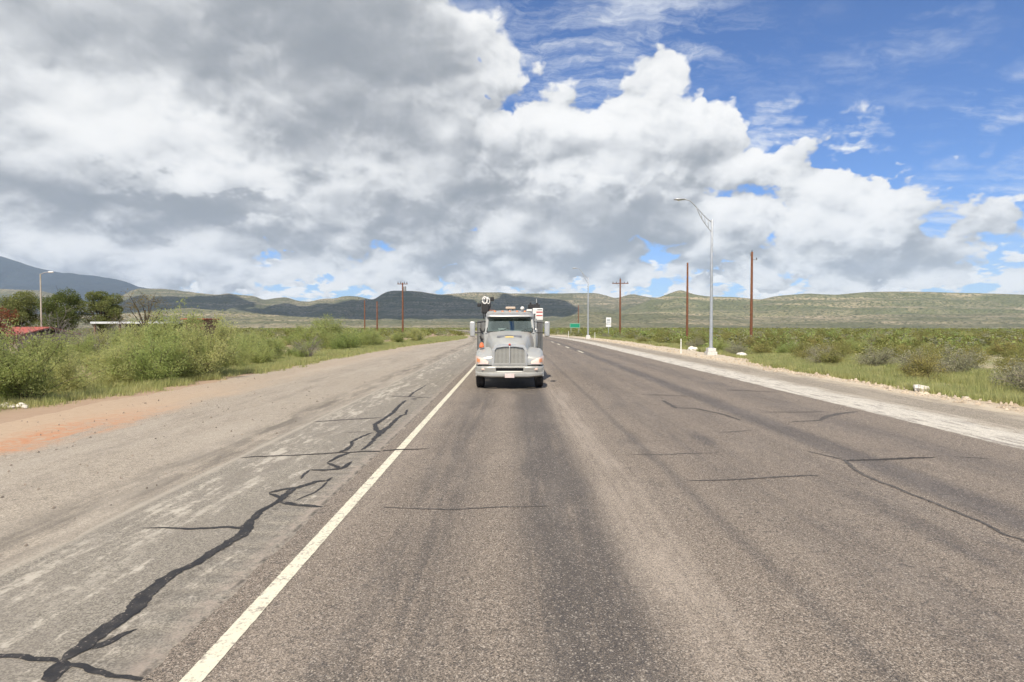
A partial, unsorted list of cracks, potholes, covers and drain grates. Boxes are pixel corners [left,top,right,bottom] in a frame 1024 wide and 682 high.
crack [808,451,1024,541]
crack [792,411,858,422]
crack [643,394,749,433]
crack [242,448,426,458]
